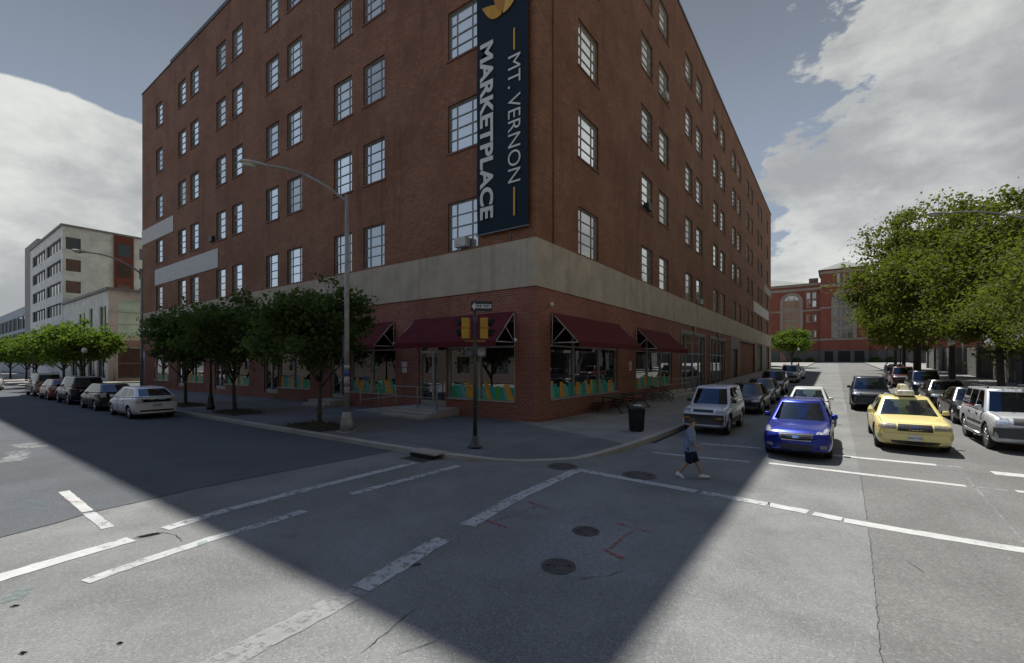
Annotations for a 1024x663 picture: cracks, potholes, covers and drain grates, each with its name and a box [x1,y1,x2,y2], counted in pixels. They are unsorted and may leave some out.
crack [363,607,437,653]
manhole cover [573,526,599,537]
manhole cover [622,471,657,480]
manhole cover [541,558,576,575]
